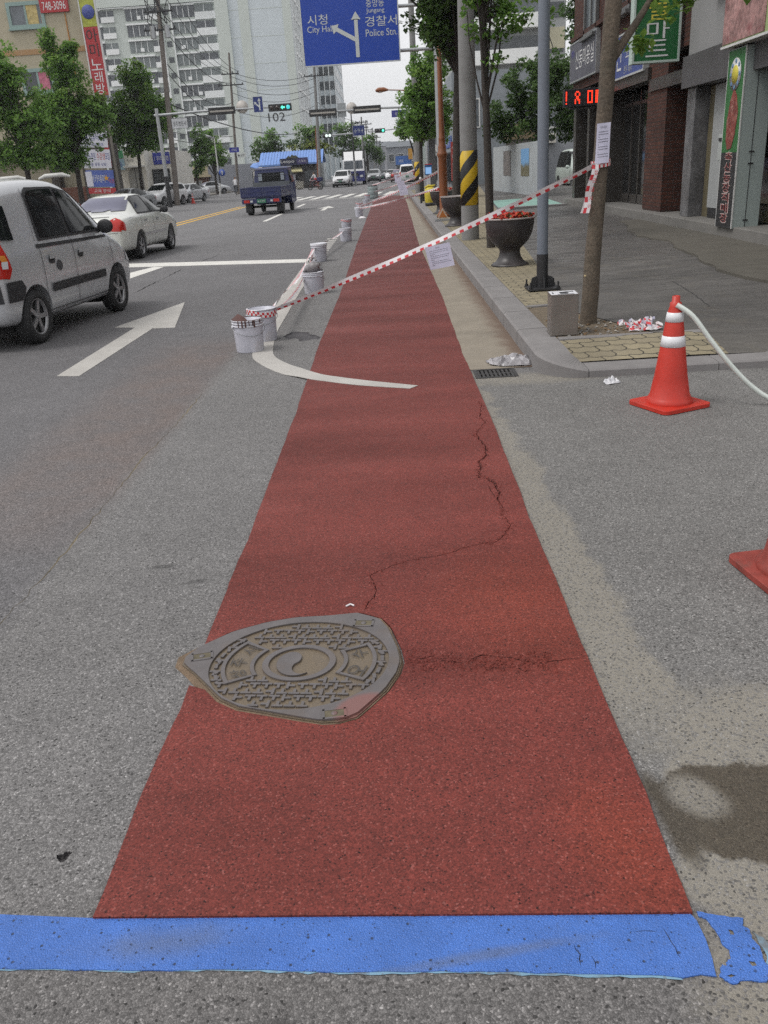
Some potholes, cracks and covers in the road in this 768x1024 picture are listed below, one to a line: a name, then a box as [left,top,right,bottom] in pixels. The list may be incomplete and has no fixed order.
manhole cover [175,613,404,725]
crack [406,647,570,678]
drain grate [473,367,519,379]
crack [364,403,514,609]
